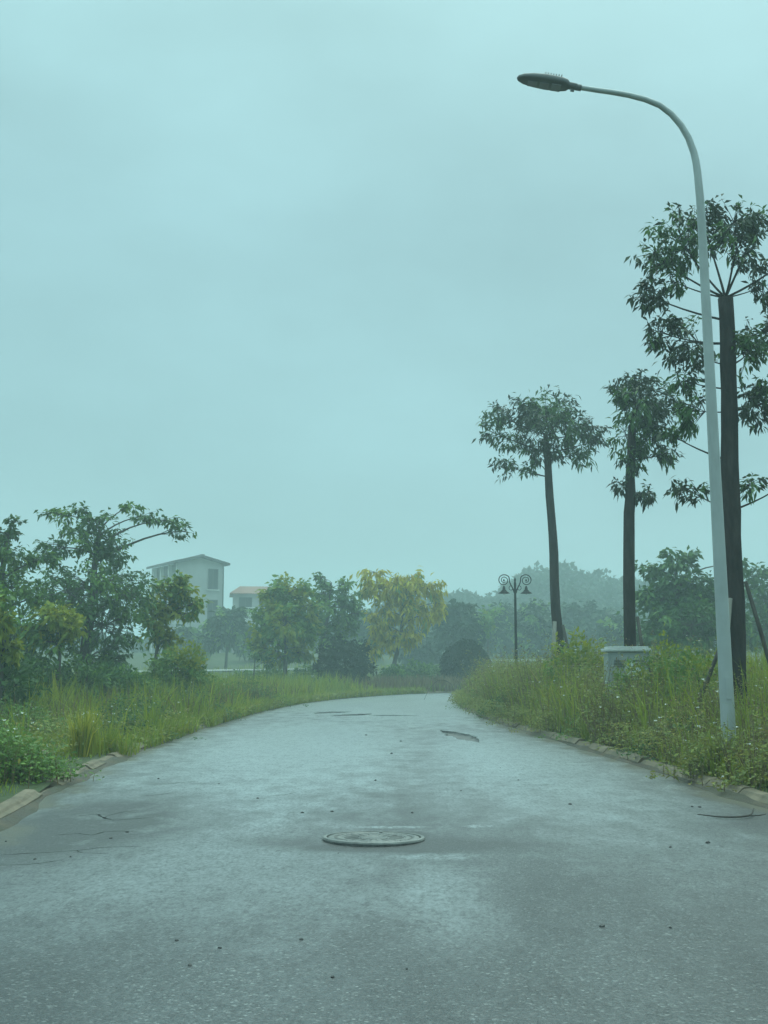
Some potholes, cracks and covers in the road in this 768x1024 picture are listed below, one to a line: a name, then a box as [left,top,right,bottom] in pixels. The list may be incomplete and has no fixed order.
manhole cover [322,831,425,847]
pothole [440,730,479,742]
crack [5,781,195,865]
